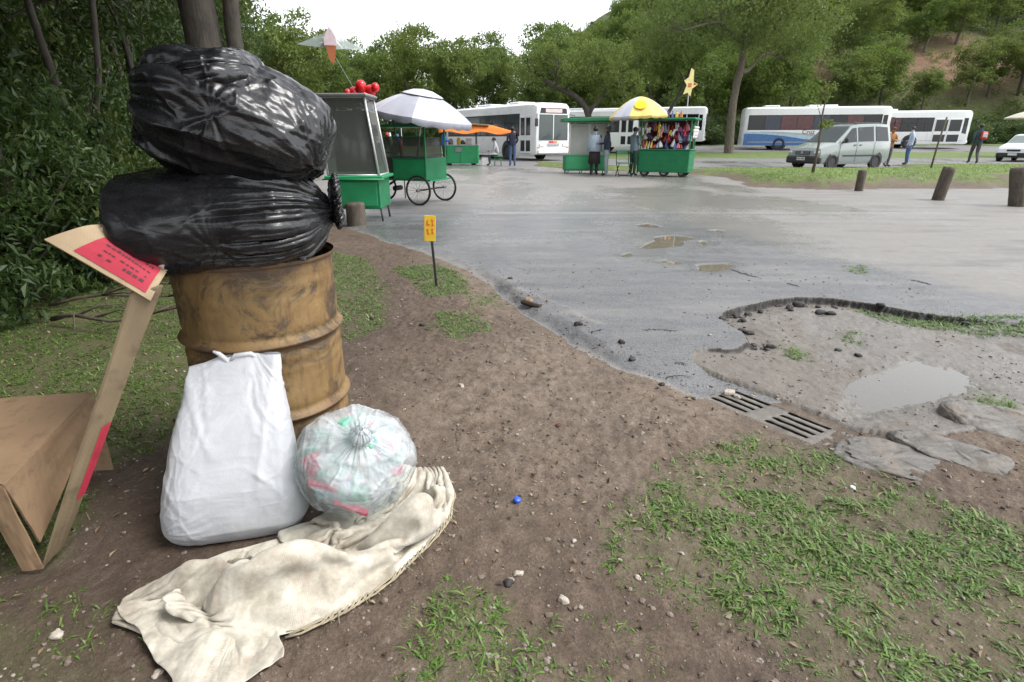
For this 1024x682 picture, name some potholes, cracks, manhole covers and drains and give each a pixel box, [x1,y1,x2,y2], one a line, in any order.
pothole [692,262,740,272]
pothole [638,234,696,249]
pothole [691,297,1024,437]
drain grate [705,388,854,445]
crack [730,269,799,287]
